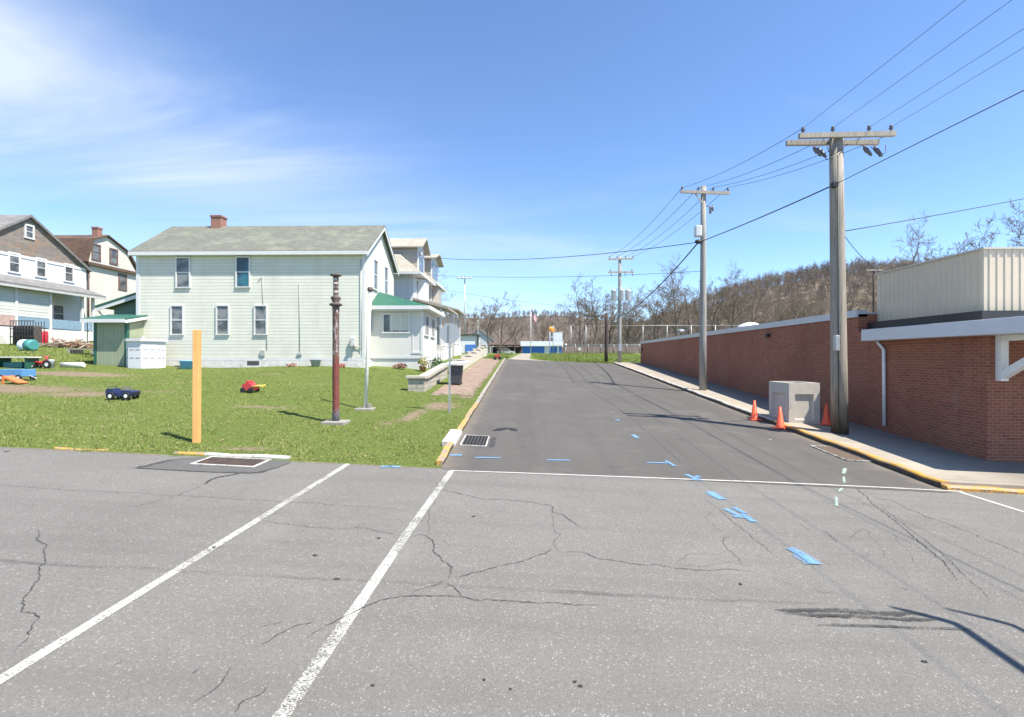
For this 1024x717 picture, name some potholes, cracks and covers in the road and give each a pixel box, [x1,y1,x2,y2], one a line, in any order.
crack [15,529,48,650]
drain grate [460,435,490,447]
crack [193,667,266,712]
crack [828,493,1020,600]
crack [307,488,772,637]
